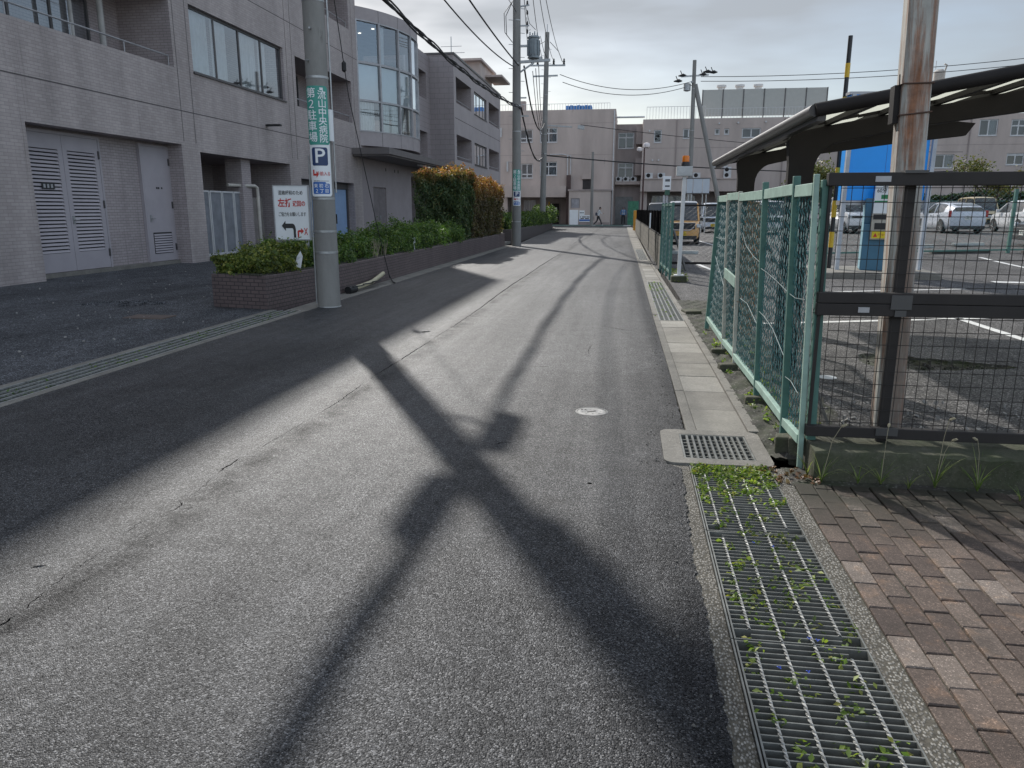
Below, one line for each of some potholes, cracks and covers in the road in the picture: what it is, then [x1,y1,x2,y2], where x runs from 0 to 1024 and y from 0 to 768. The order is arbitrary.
drain grate [0,382,65,403]
drain grate [705,530,868,650]
drain grate [101,343,191,362]
drain grate [206,319,269,332]
drain grate [26,360,136,385]
drain grate [731,639,933,768]
drain grate [160,330,233,345]
drain grate [654,303,679,312]
drain grate [689,465,806,537]
drain grate [245,310,301,320]
manhole cover [575,407,608,416]
drain grate [657,311,685,321]
